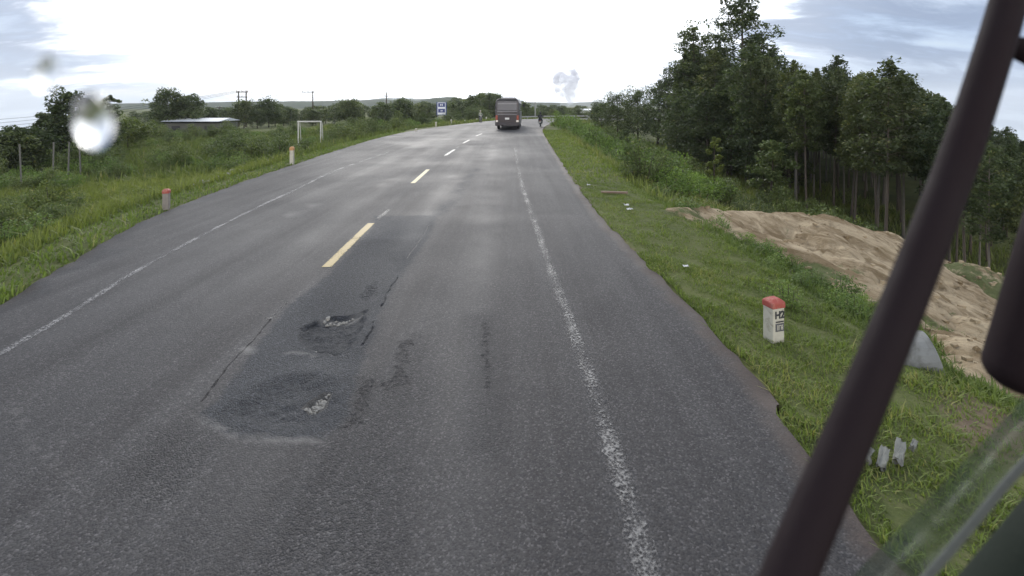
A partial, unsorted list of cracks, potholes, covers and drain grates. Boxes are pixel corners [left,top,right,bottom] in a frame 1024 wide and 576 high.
pothole [211,369,349,439]
crack [195,302,287,410]
pothole [297,309,369,356]
crack [337,276,415,430]
